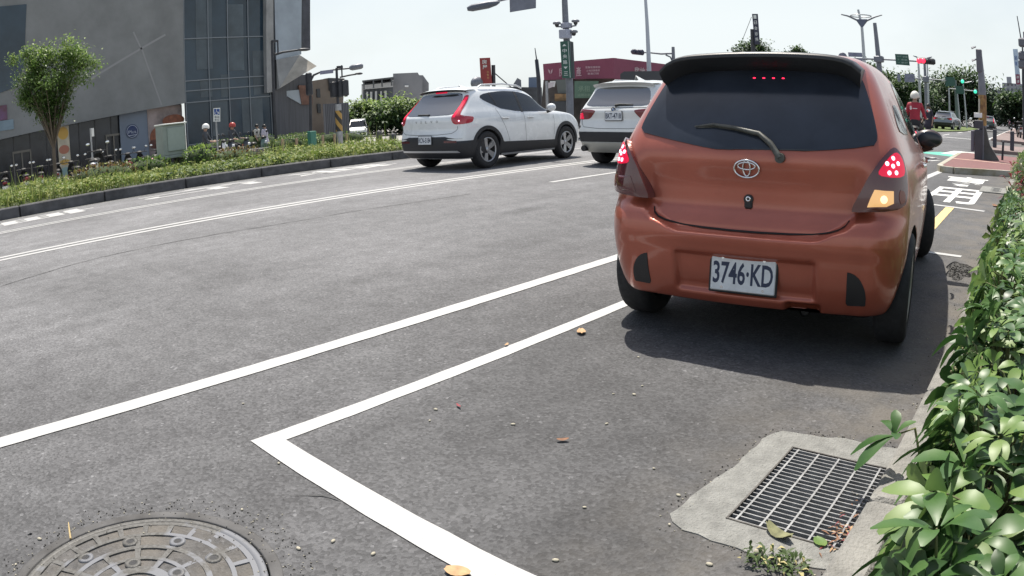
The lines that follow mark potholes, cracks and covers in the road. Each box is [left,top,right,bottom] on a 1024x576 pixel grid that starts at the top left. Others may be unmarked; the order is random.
drain grate [670,431,897,570]
manhole cover [16,512,284,576]
